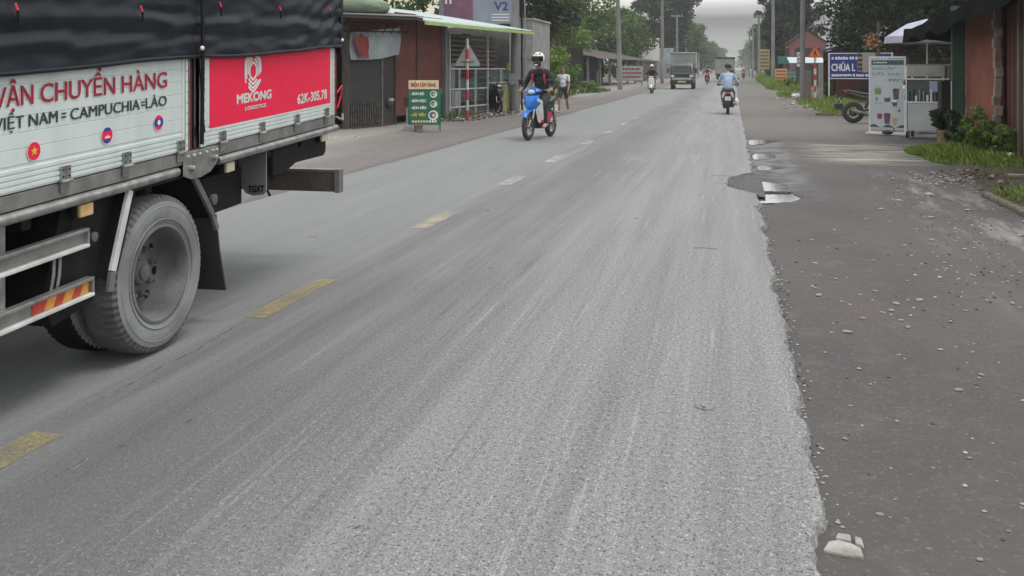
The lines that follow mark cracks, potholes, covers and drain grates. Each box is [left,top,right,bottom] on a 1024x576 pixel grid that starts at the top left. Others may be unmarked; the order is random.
crack [55,457,89,476]
pothole [727,172,766,197]
